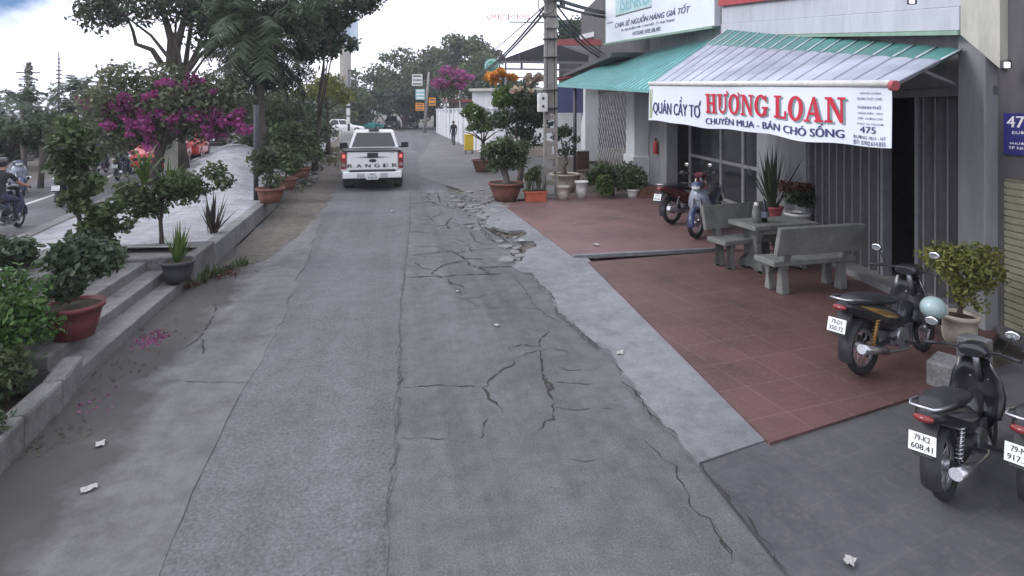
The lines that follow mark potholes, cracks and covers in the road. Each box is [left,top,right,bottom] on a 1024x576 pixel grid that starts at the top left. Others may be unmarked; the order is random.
crack [179,304,217,353]
crack [403,192,789,574]
pothole [489,229,525,239]
